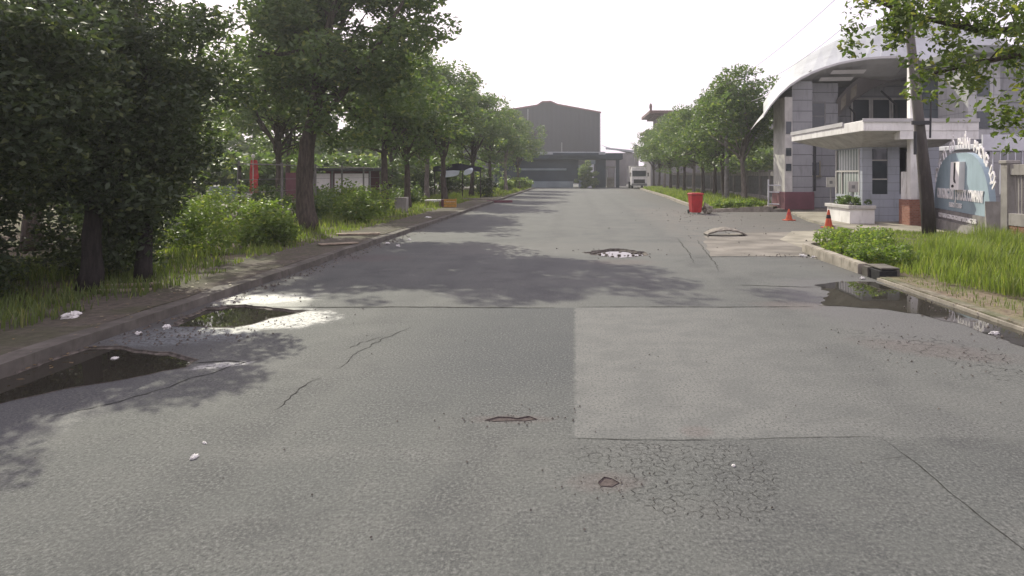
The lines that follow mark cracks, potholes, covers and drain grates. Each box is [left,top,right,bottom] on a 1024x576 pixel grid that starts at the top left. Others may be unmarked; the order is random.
pothole [583,248,649,258]
pothole [171,304,309,328]
crack [578,442,778,521]
pothole [598,477,619,487]
crack [277,327,410,409]
pothole [0,345,199,404]
drain grate [862,264,900,280]
